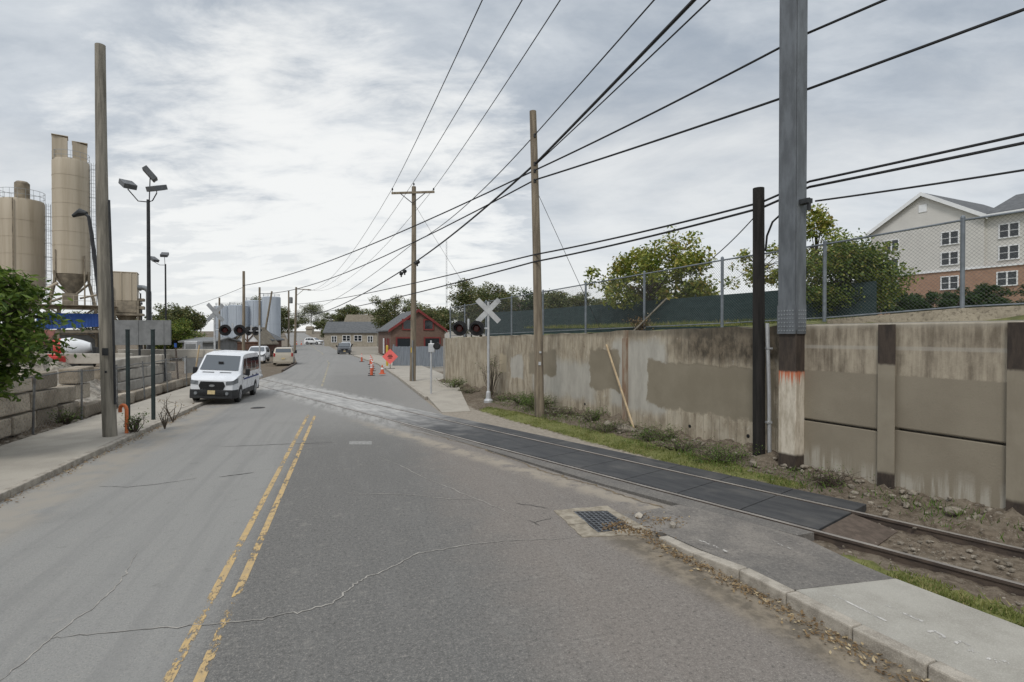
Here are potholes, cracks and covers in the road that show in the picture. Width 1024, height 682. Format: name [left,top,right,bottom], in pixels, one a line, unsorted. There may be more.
drain grate [554,505,655,538]
crack [0,536,578,680]
